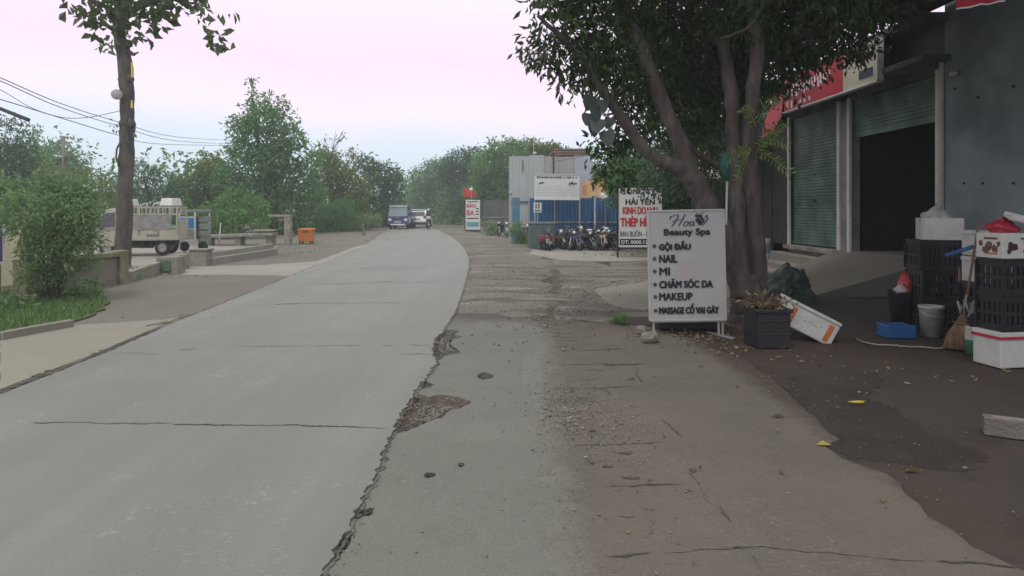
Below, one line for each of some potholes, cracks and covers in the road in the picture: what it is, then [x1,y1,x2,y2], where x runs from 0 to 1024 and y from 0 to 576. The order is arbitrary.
crack [545,316,643,393]
pothole [432,330,461,361]
crack [571,420,681,446]
crack [607,519,1021,574]
crack [604,470,731,522]
pothole [394,394,471,433]
